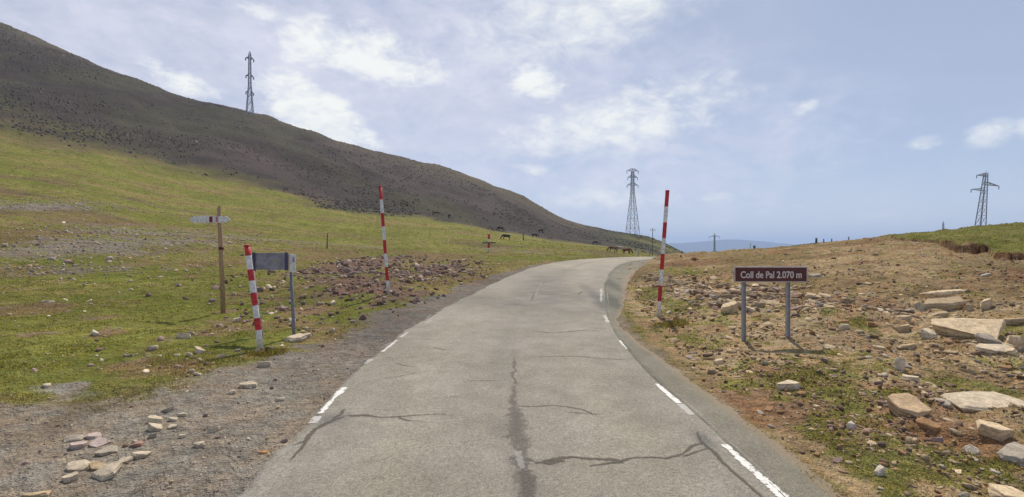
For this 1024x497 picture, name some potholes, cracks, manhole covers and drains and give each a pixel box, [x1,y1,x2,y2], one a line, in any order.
crack [290,409,440,460]
crack [502,360,763,497]
